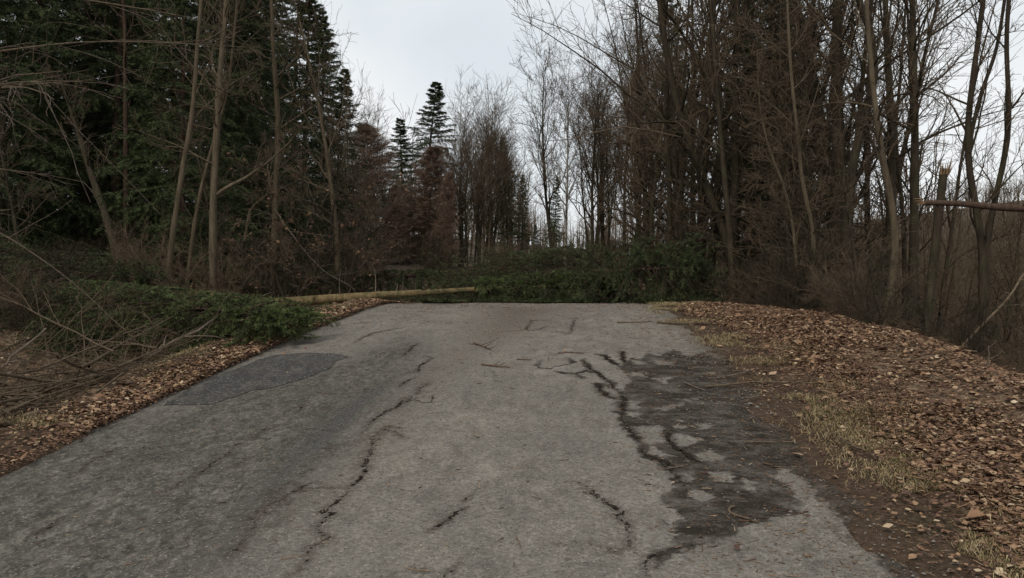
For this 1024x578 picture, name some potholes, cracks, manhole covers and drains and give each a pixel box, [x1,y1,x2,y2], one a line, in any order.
crack [230,345,433,575]
crack [559,351,704,576]
crack [430,496,469,530]
